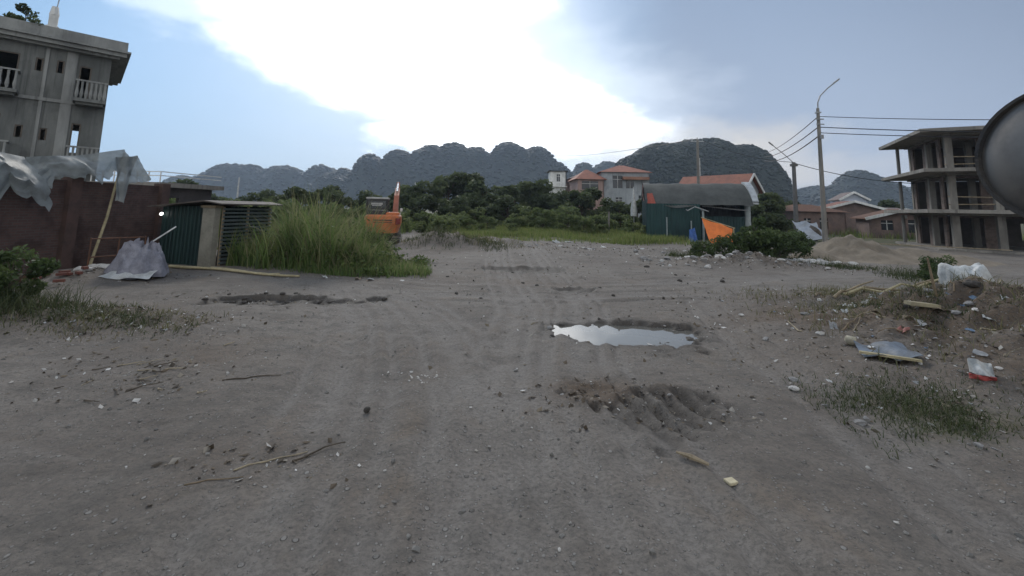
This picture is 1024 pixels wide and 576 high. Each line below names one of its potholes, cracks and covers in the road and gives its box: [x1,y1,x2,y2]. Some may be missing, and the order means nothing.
pothole [538,317,725,357]
pothole [553,379,737,459]
pothole [80,293,392,309]
